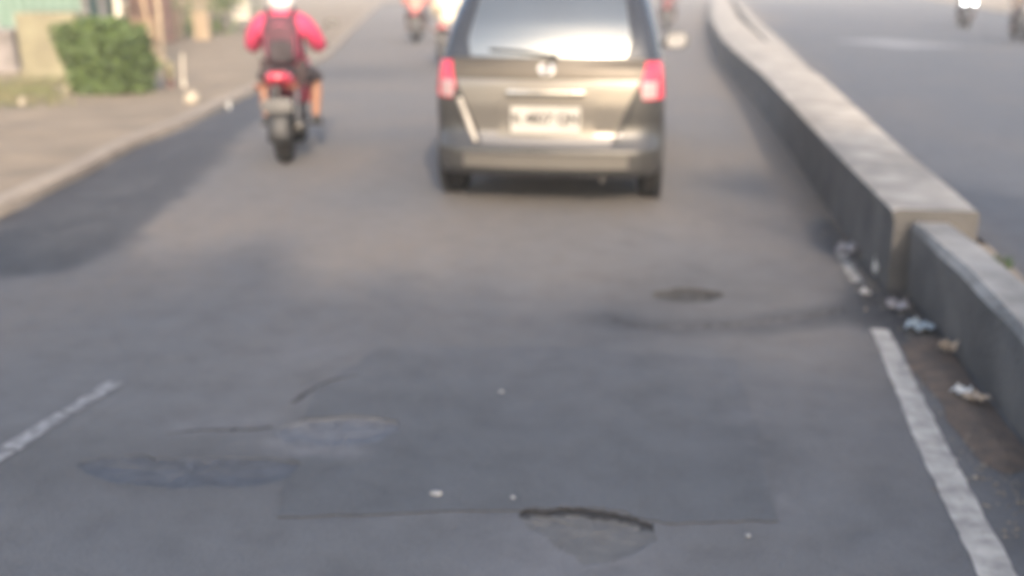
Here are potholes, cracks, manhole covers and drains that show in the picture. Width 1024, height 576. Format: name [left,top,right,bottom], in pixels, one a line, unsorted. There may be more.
crack [290,378,342,404]
pothole [519,508,658,565]
